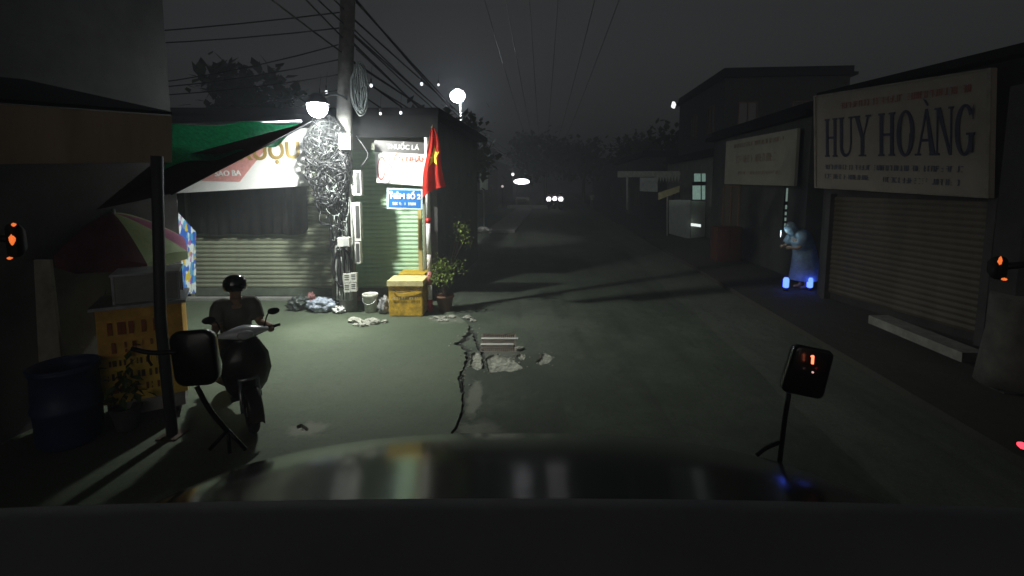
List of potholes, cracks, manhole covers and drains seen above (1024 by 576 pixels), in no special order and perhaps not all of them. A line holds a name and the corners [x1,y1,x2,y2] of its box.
pothole [470,352,483,370]
pothole [536,353,554,365]
drain grate [480,334,518,355]
pothole [485,355,522,373]
crack [451,327,486,434]
